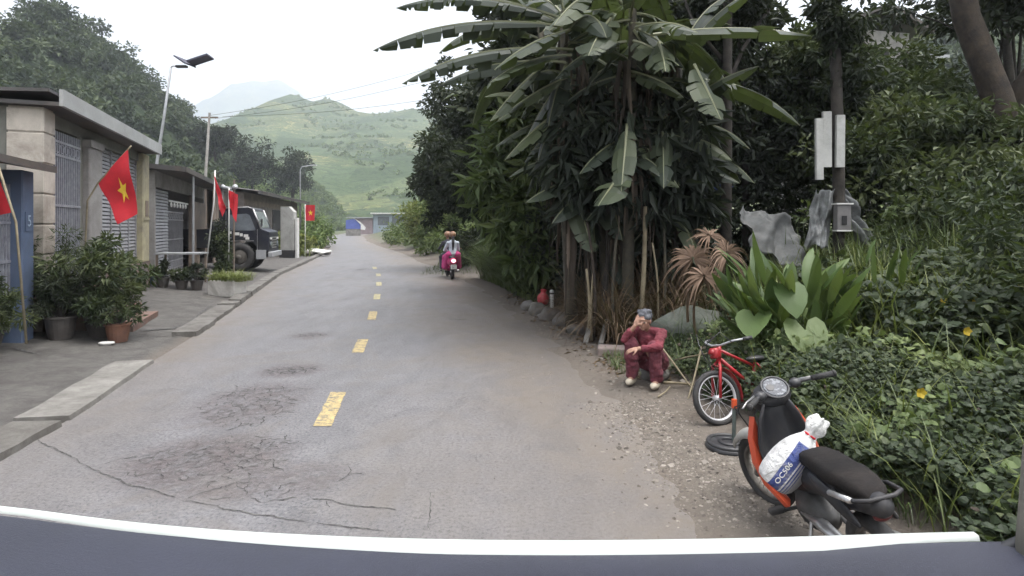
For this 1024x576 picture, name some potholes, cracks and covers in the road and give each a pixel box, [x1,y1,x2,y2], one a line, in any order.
crack [38,366,396,531]
